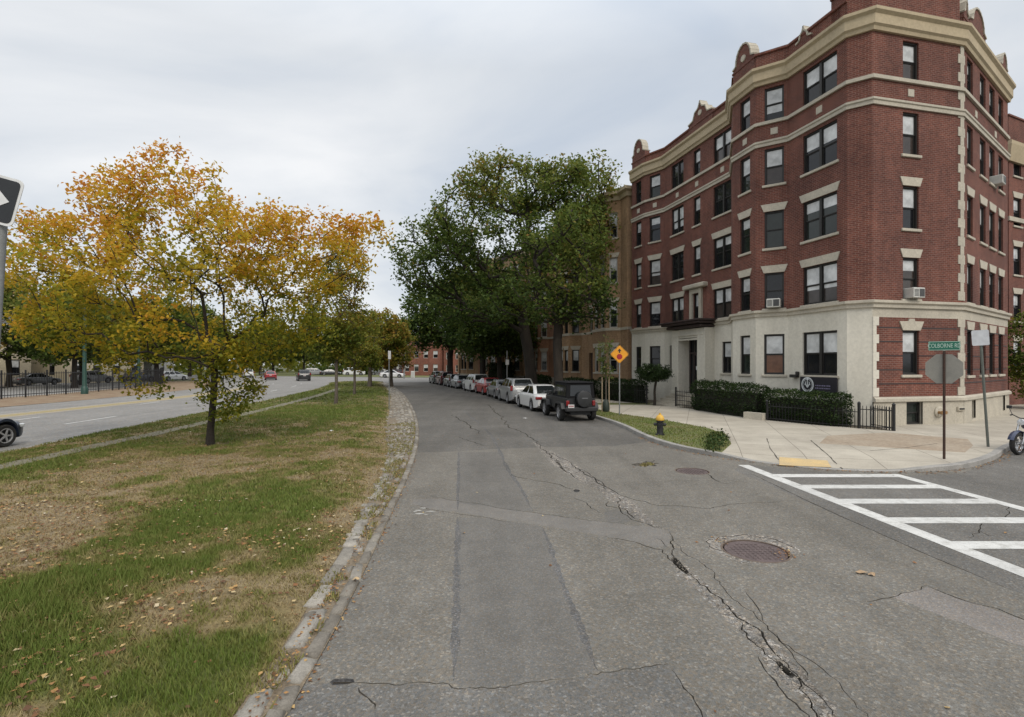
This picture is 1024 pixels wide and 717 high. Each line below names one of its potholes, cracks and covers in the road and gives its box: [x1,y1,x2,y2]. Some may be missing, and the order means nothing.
crack [417,406,868,717]
crack [861,585,1024,620]
manhole cover [720,539,792,563]
crack [333,678,571,707]
